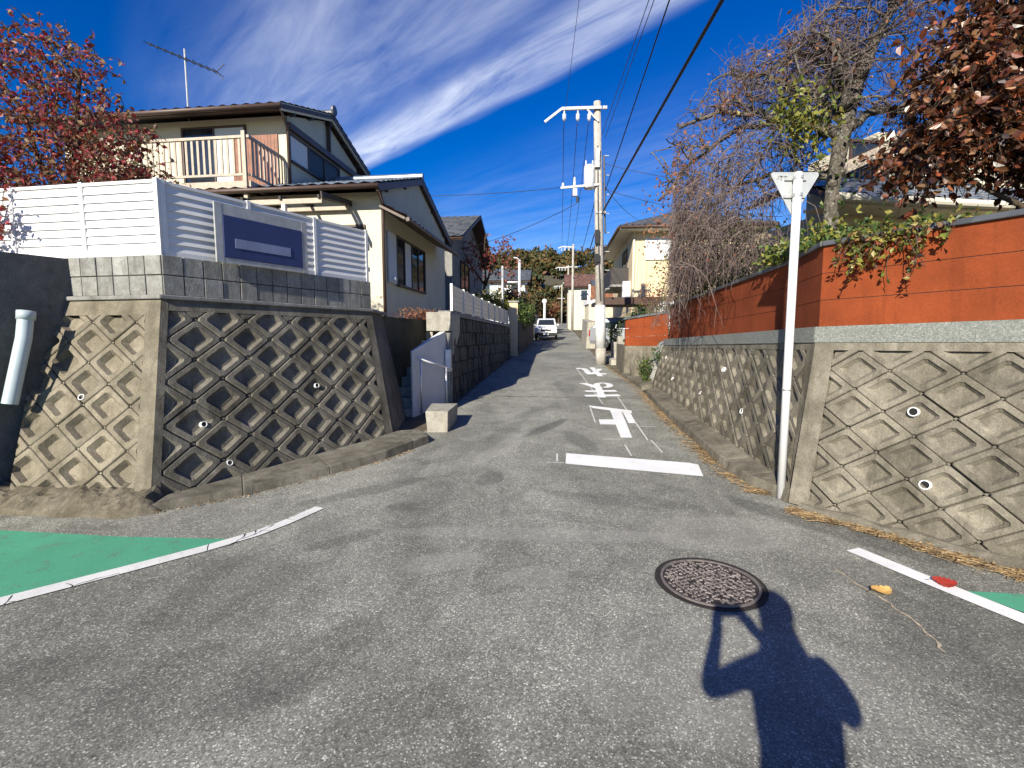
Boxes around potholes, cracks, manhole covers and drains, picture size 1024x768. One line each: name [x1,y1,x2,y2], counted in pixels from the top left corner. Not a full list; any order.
manhole cover [655,557,769,612]
